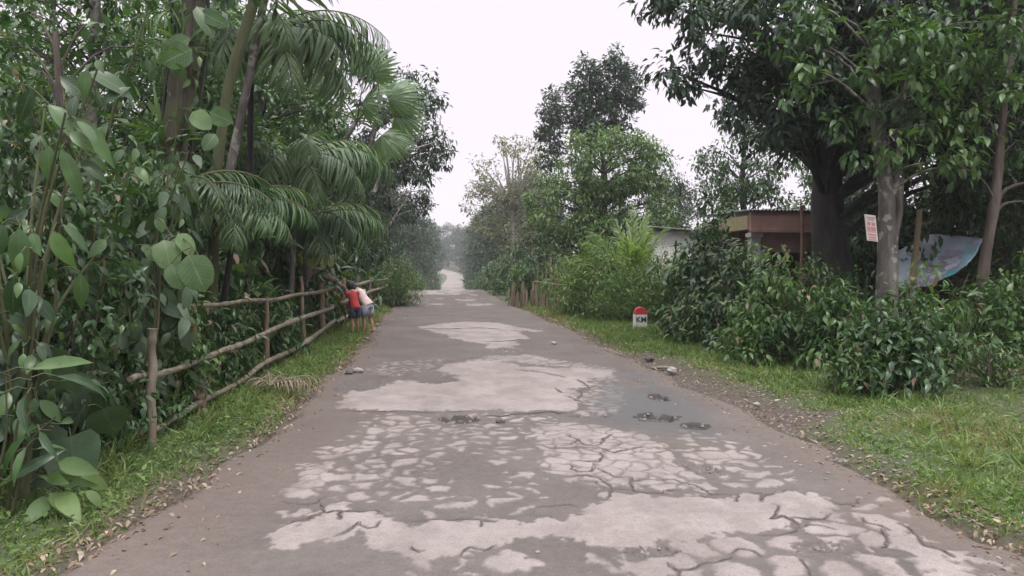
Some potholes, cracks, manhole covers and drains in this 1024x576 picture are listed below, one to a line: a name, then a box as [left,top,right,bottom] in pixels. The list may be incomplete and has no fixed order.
crack [276,497,383,533]
crack [495,350,954,576]
pothole [680,422,711,430]
pothole [437,414,480,424]
pothole [632,412,683,423]
